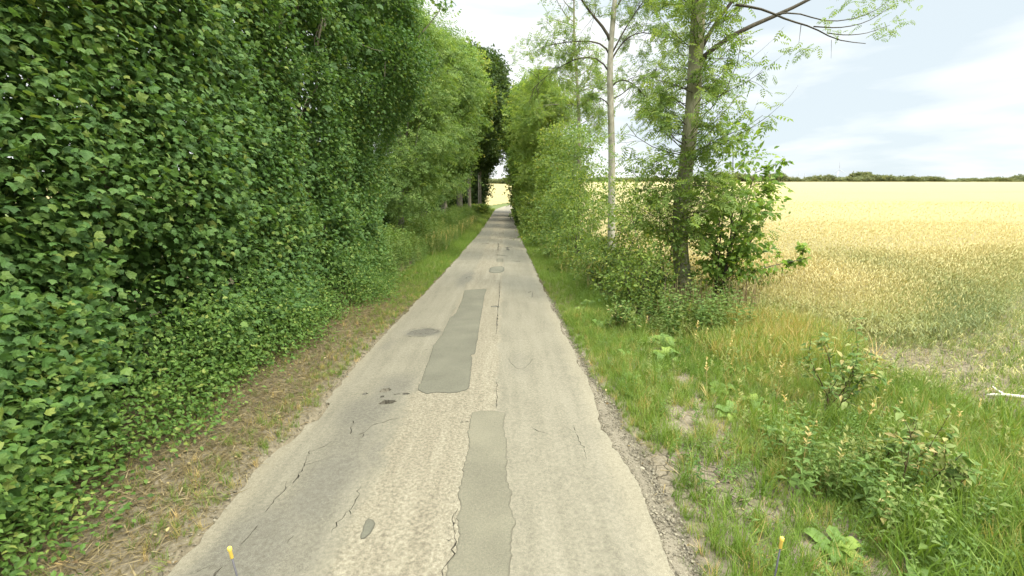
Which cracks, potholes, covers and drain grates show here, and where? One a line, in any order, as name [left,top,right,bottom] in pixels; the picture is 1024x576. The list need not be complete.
crack [242,444,328,543]
crack [441,509,458,576]
